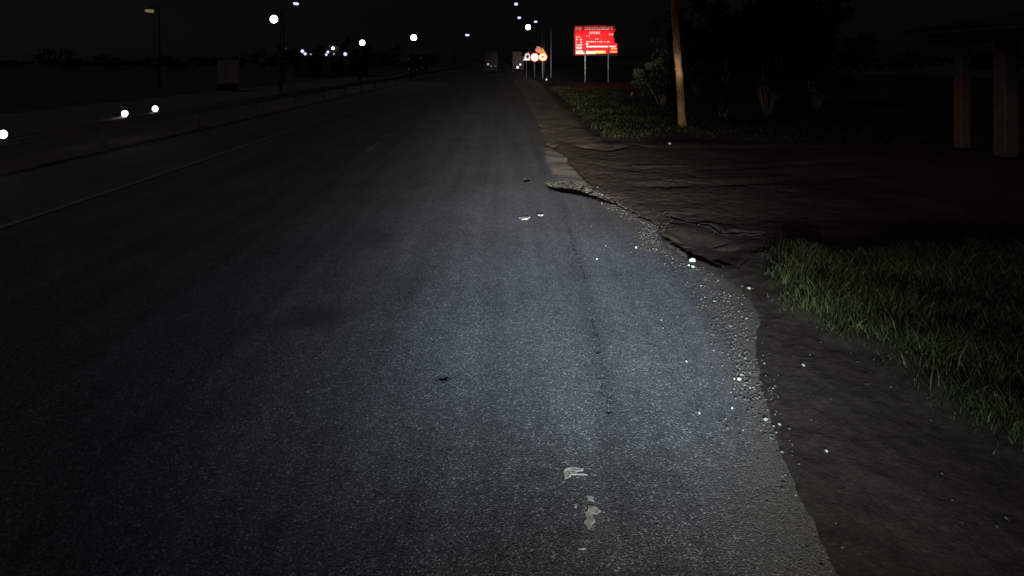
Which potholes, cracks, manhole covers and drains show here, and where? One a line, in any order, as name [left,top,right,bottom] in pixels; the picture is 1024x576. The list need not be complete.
crack [562,205,610,412]
crack [665,213,763,237]
